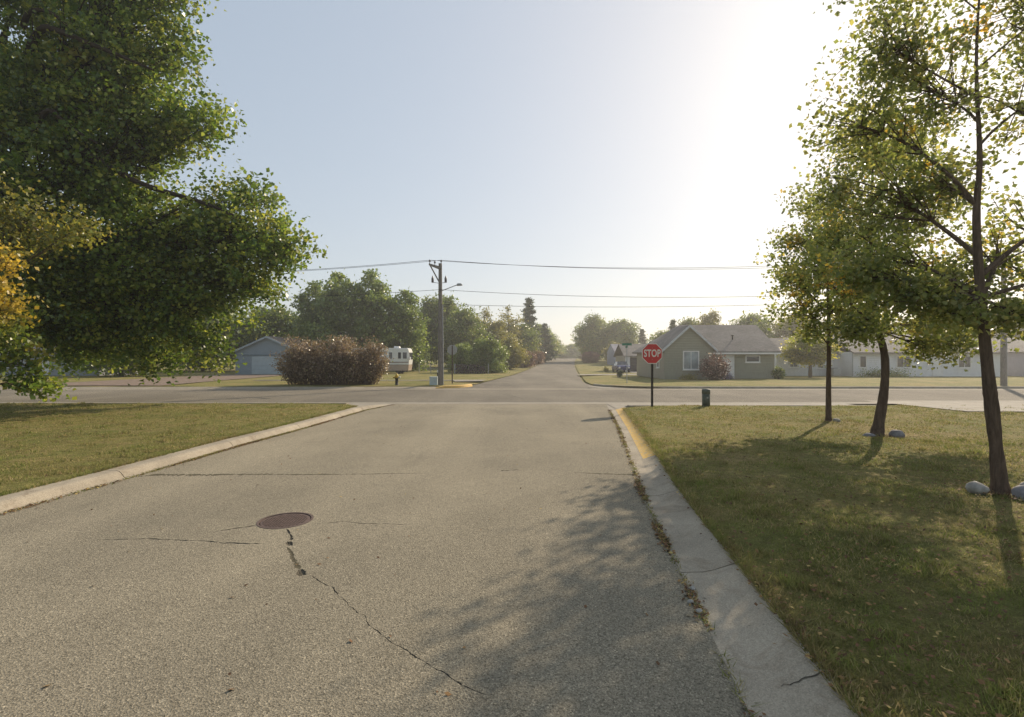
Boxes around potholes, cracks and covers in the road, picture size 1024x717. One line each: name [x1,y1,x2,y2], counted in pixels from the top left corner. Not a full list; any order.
manhole cover [256,512,314,529]
crack [287,529,487,695]
crack [106,526,259,544]
